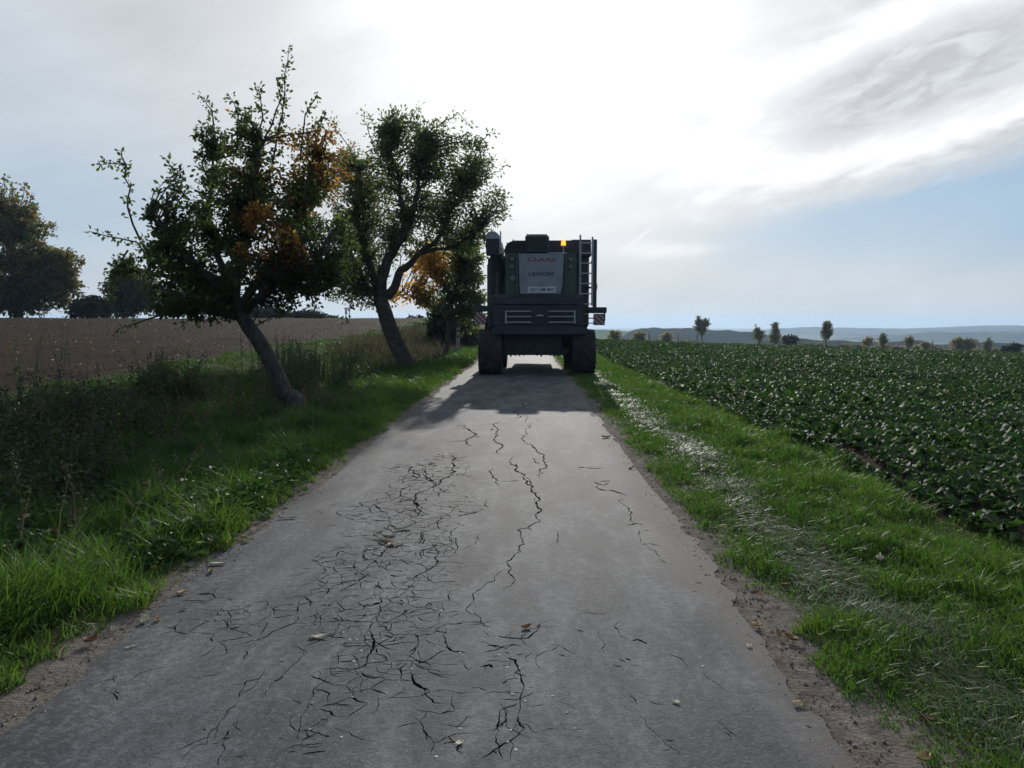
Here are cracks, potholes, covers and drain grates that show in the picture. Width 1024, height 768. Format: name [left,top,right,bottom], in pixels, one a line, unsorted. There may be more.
crack [149,401,647,765]
crack [579,467,665,563]
crack [631,695,680,756]
